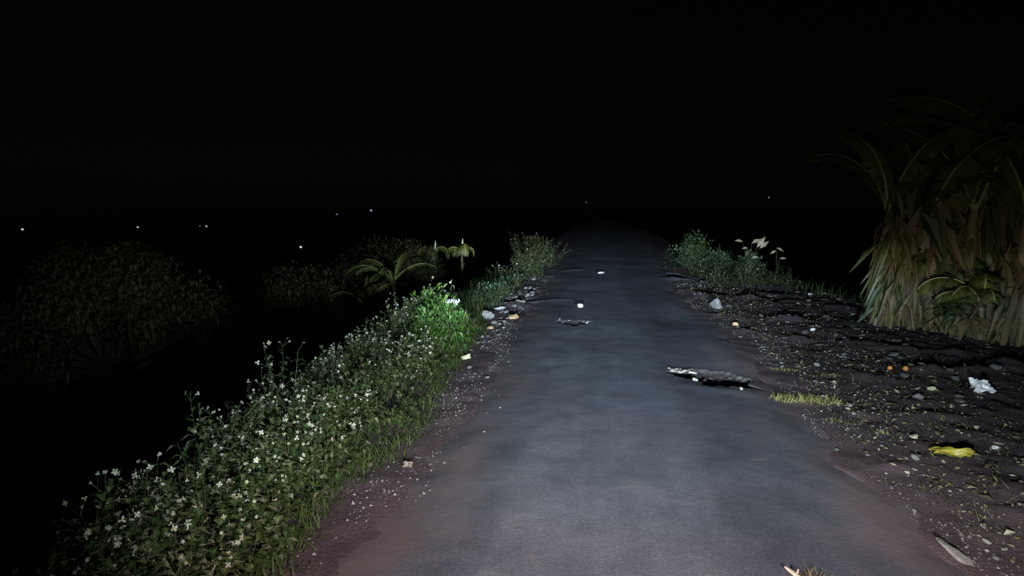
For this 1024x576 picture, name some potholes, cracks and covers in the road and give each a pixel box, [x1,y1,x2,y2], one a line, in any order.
pothole [665,369,767,391]
